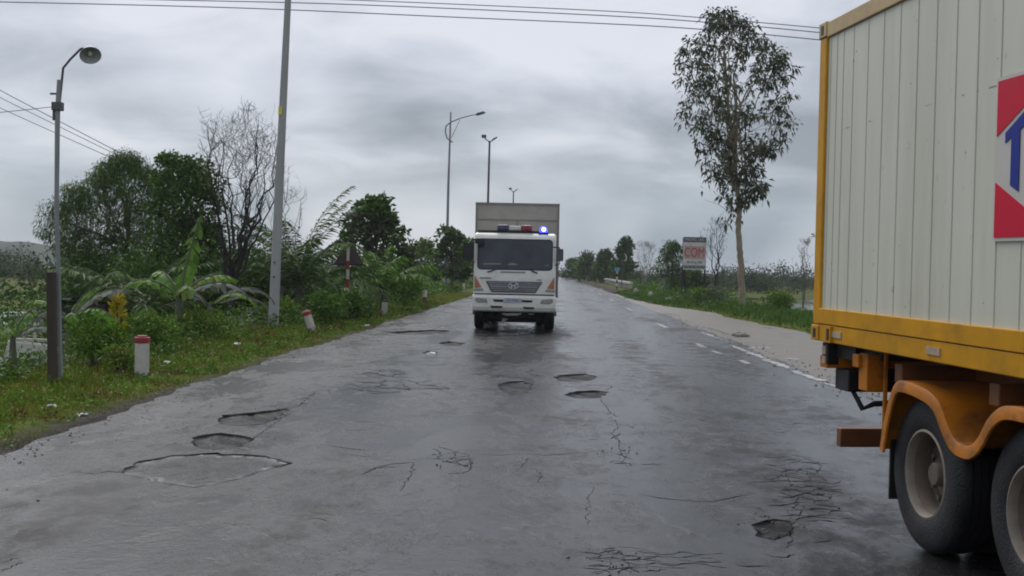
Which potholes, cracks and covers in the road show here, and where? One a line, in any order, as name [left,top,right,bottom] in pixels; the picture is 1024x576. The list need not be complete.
pothole [120,452,292,488]
crack [583,455,866,574]
pothole [554,373,597,382]
pothole [751,519,795,540]
pothole [218,408,290,426]
crack [330,421,415,491]
crack [339,350,456,394]
pothole [190,433,254,450]
pothole [564,390,608,399]
pothole [498,381,534,395]
crack [429,446,607,483]
